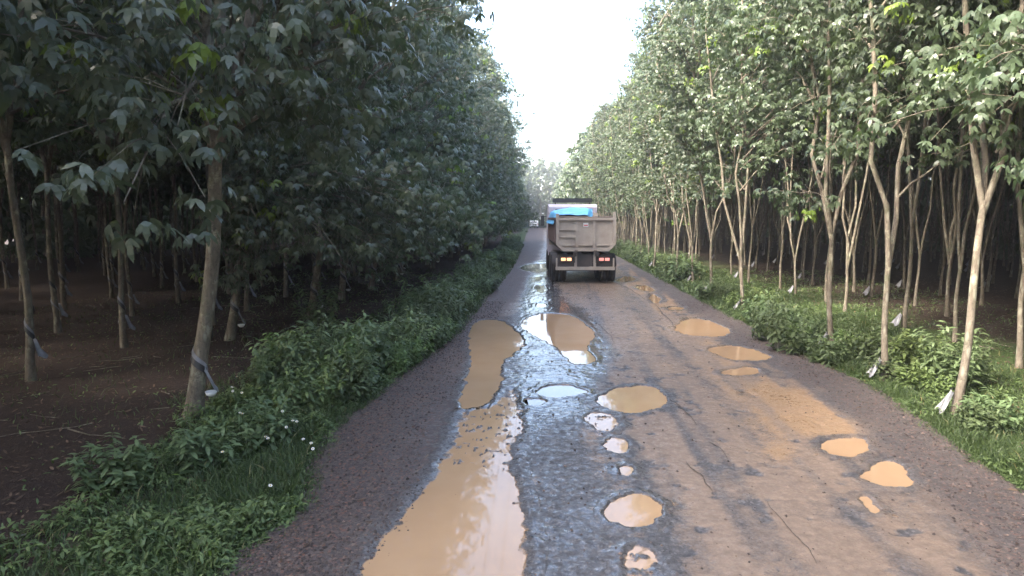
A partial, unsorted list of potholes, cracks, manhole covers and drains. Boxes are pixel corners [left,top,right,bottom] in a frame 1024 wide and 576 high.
pothole [590,434,641,458]
pothole [711,365,770,378]
pothole [446,319,532,413]
pothole [585,382,678,416]
pothole [527,382,597,401]
pothole [606,460,645,480]
pothole [338,384,550,576]
pothole [665,317,740,338]
crack [767,501,817,563]
pothole [700,344,782,363]
